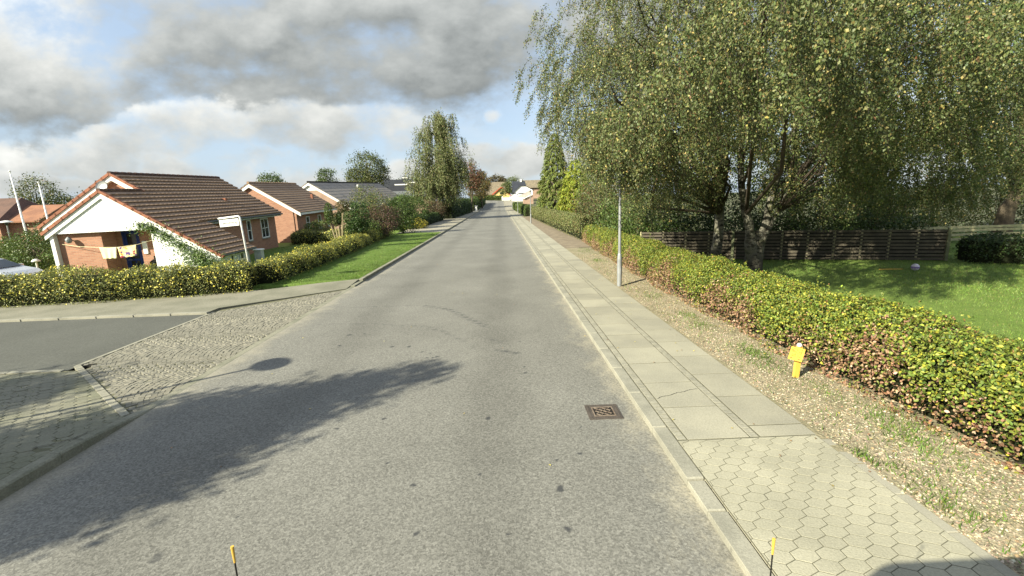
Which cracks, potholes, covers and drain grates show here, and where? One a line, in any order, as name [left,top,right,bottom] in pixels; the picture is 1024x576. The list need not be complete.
drain grate [584,404,624,420]
